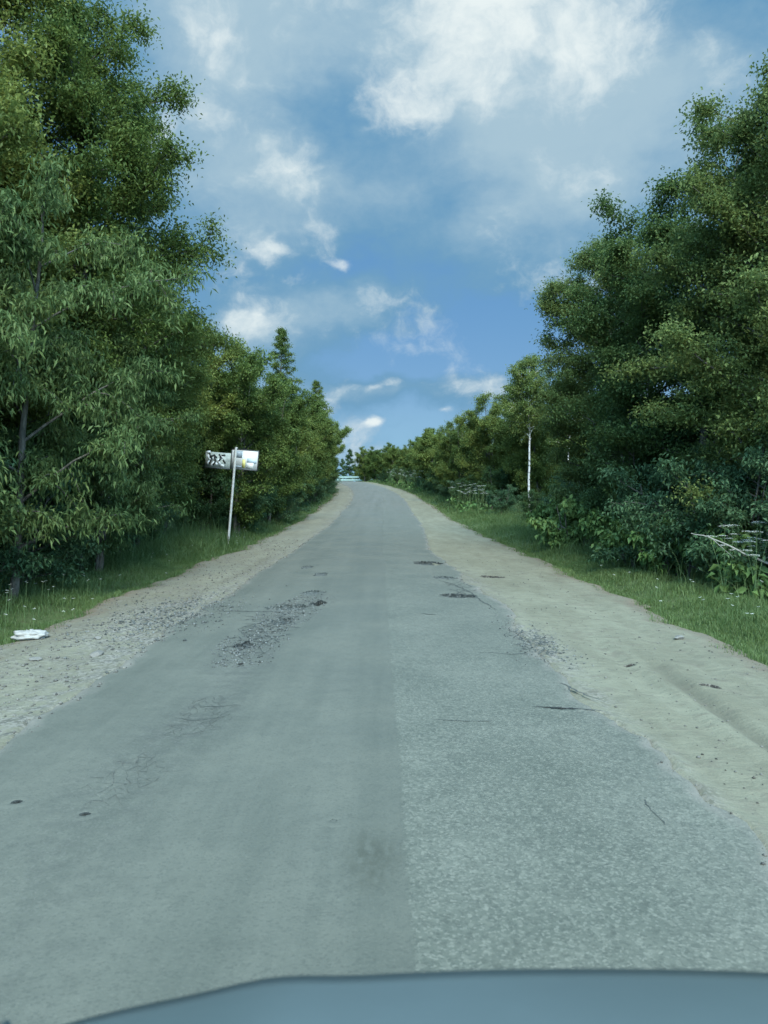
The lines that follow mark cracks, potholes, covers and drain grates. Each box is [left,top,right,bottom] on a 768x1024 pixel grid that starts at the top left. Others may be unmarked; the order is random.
crack [164,696,236,736]
crack [533,683,607,712]
pothole [66,808,103,822]
pothole [267,617,297,626]
pothole [260,603,315,612]
crack [82,753,170,805]
crack [440,579,495,609]
pothole [226,639,263,653]
